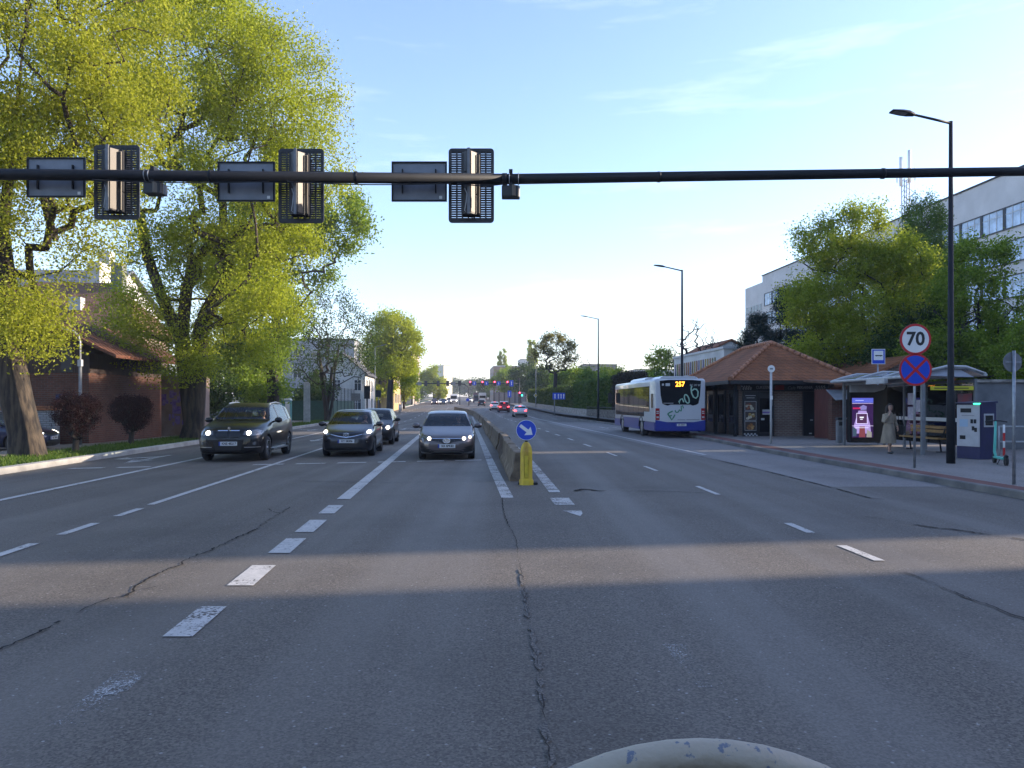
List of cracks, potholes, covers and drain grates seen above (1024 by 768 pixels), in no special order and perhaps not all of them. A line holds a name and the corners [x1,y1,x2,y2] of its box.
crack [0,507,290,649]
crack [866,516,1024,540]
crack [904,572,1024,618]
crack [502,497,556,768]
